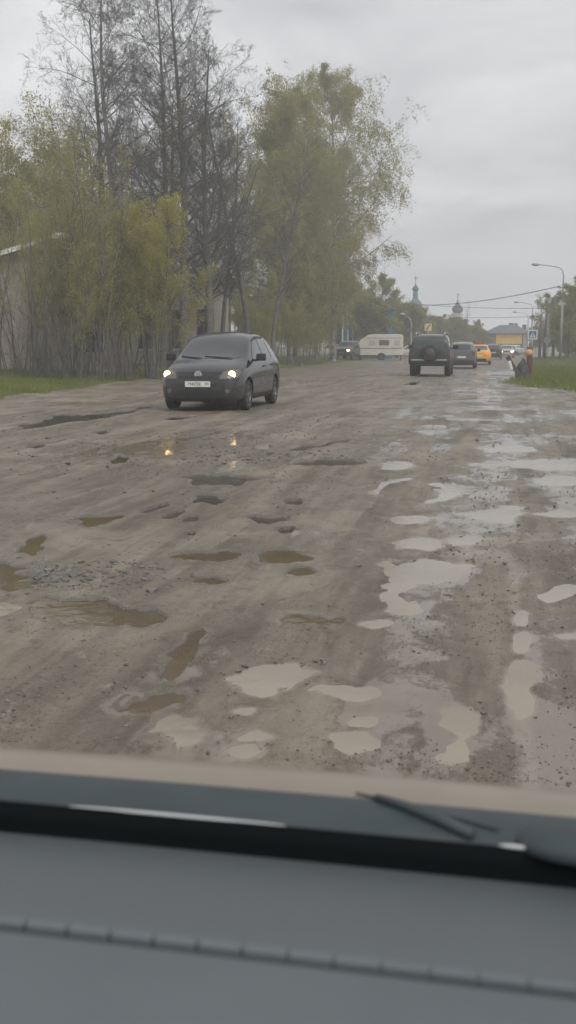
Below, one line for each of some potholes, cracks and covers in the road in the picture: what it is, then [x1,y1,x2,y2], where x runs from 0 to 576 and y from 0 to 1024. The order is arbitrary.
pothole [377,559,475,616]
pothole [279,614,345,625]
pothole [225,663,320,698]
pothole [308,684,382,702]
pothole [67,512,127,527]
pothole [158,628,206,681]
pothole [14,534,48,556]
pothole [254,548,314,564]
pothole [25,595,170,628]
pothole [168,548,247,562]
pothole [241,514,291,524]
pothole [173,472,275,486]
